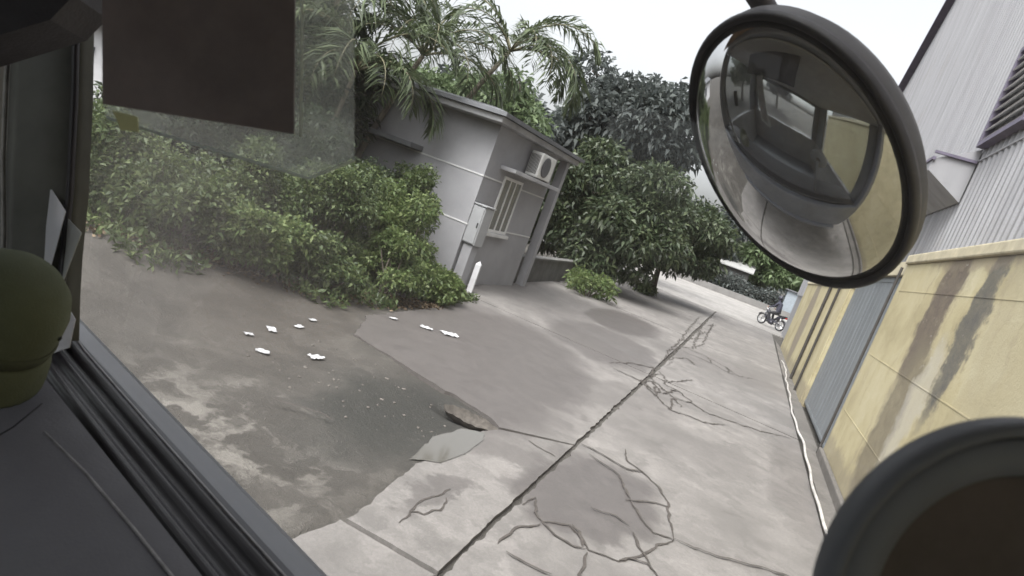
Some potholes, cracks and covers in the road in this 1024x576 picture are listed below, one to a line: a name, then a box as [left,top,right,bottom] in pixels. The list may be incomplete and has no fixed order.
pothole [444,404,498,432]
crack [609,320,788,438]
crack [399,489,450,523]
crack [498,443,789,576]
